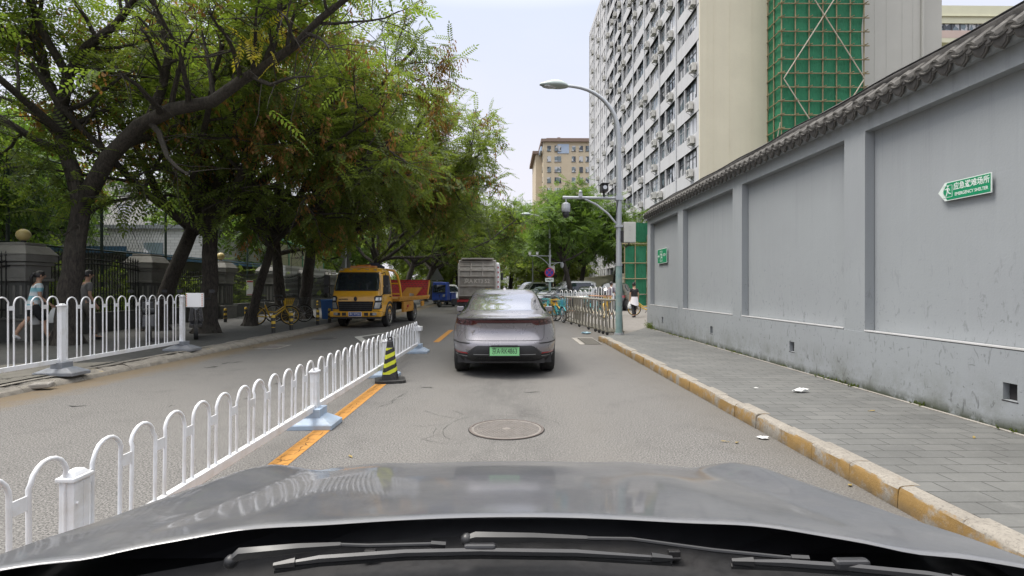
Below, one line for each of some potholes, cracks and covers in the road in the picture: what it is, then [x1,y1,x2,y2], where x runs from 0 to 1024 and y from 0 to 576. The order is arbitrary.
manhole cover [468,419,545,440]
